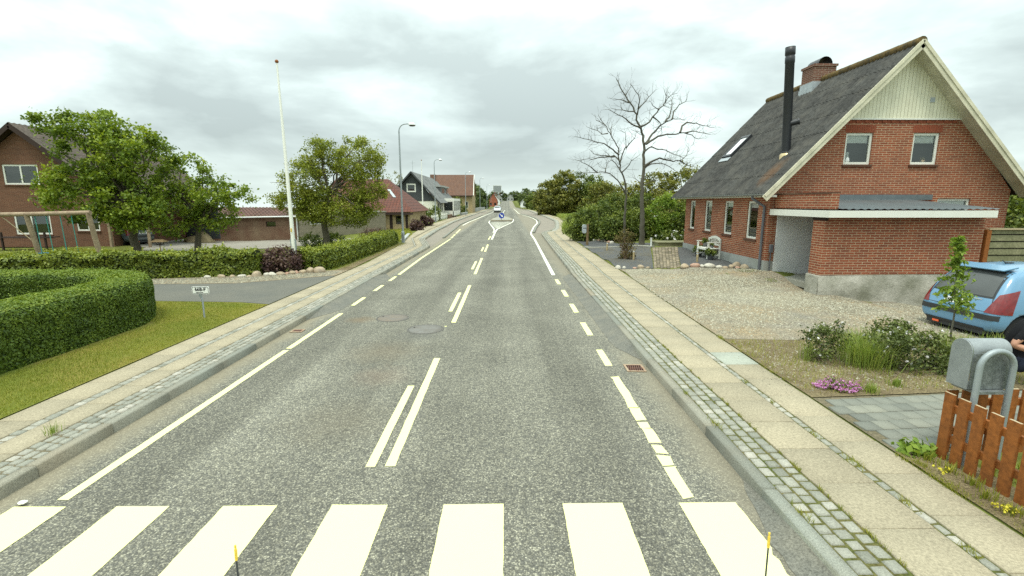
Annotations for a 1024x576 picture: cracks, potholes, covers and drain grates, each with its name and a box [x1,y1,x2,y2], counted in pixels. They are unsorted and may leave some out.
manhole cover [407,324,444,334]
drain grate [623,364,647,372]
manhole cover [376,314,409,322]
